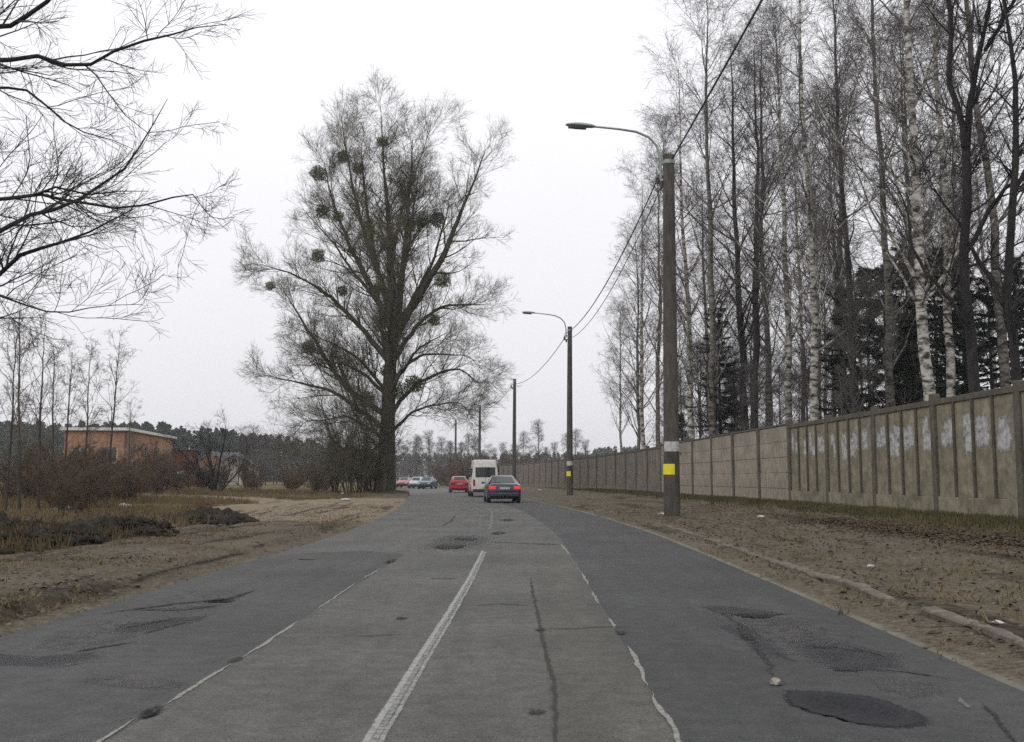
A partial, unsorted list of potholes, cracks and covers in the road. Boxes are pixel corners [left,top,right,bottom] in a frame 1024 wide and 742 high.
crack [481,575,627,742]
crack [959,698,1017,742]
